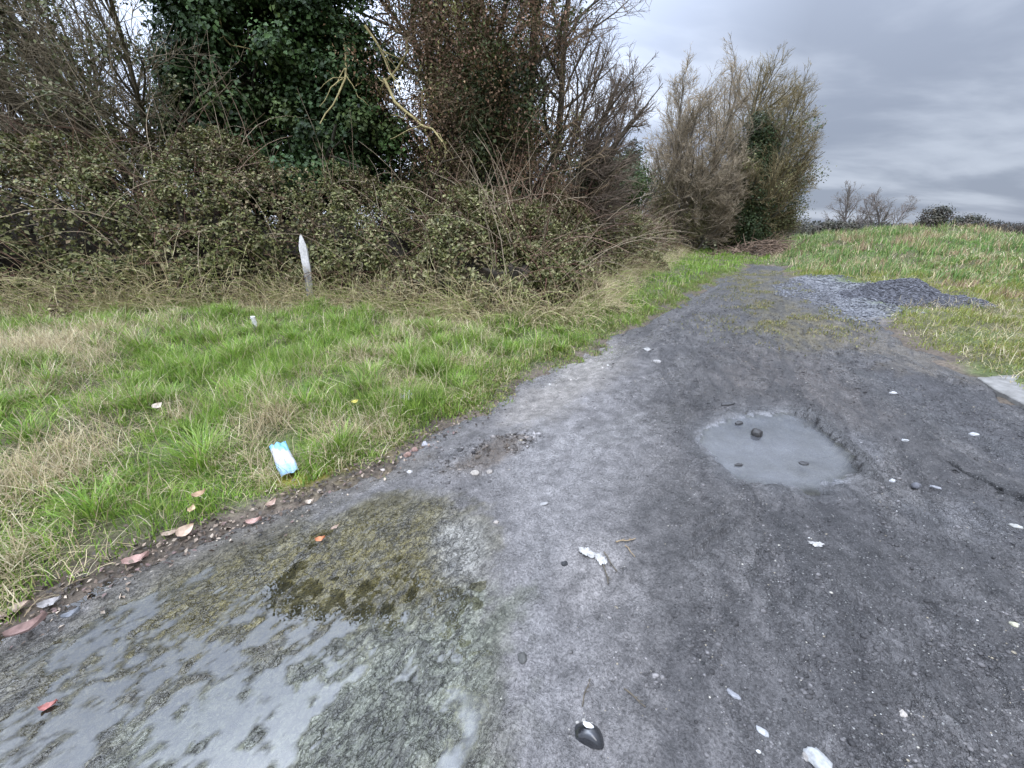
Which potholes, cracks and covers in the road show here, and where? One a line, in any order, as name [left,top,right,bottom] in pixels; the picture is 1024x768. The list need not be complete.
crack [936,456,1024,512]
pothole [681,404,884,504]
